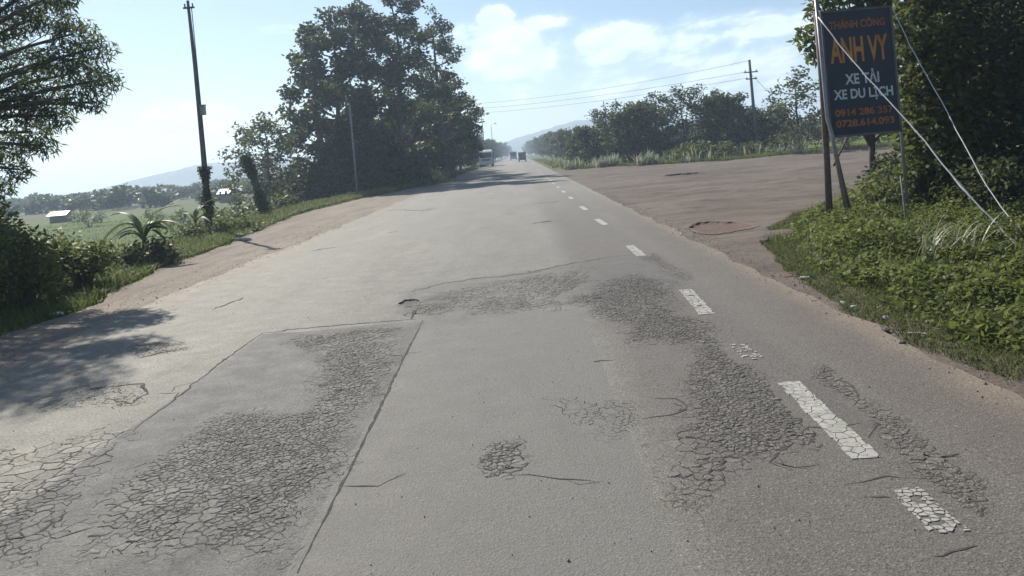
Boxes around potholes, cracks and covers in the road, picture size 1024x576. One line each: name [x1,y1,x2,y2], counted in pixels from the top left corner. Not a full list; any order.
pothole [396,298,422,306]
crack [0,252,994,576]
